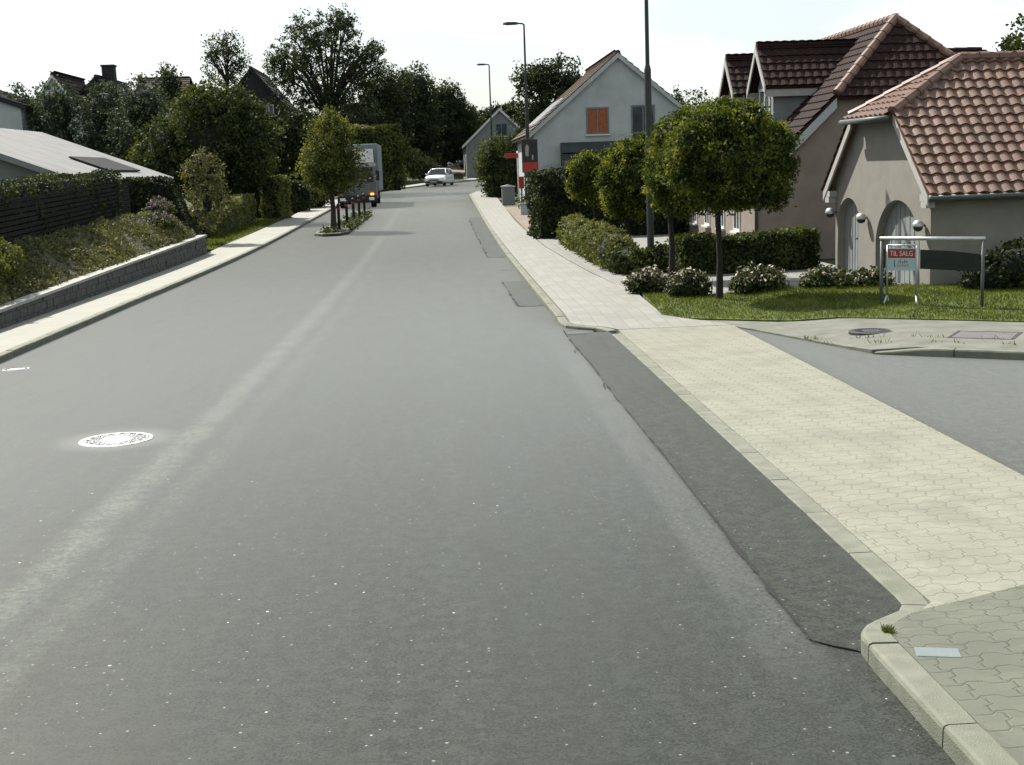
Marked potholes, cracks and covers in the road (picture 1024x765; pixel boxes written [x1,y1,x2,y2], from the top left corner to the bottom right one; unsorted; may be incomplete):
manhole cover [78,432,154,447]
manhole cover [848,328,893,336]
manhole cover [947,330,1023,340]
utility cover [914,647,962,658]
